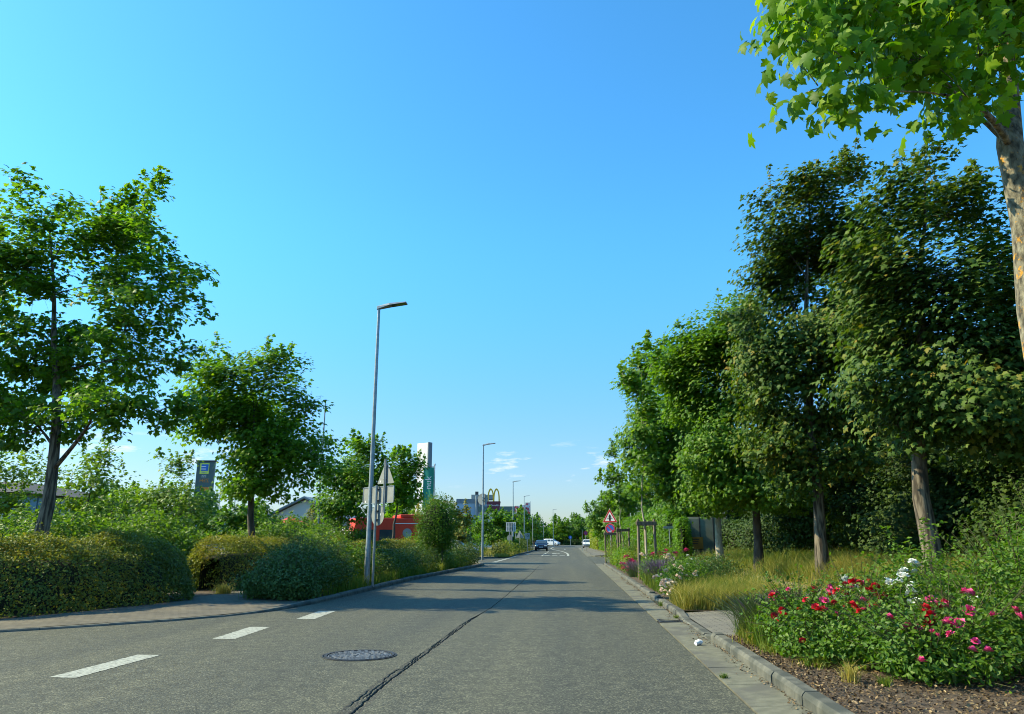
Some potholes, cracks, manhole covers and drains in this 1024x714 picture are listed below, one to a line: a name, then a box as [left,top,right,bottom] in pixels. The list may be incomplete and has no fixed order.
manhole cover [322,650,397,661]
